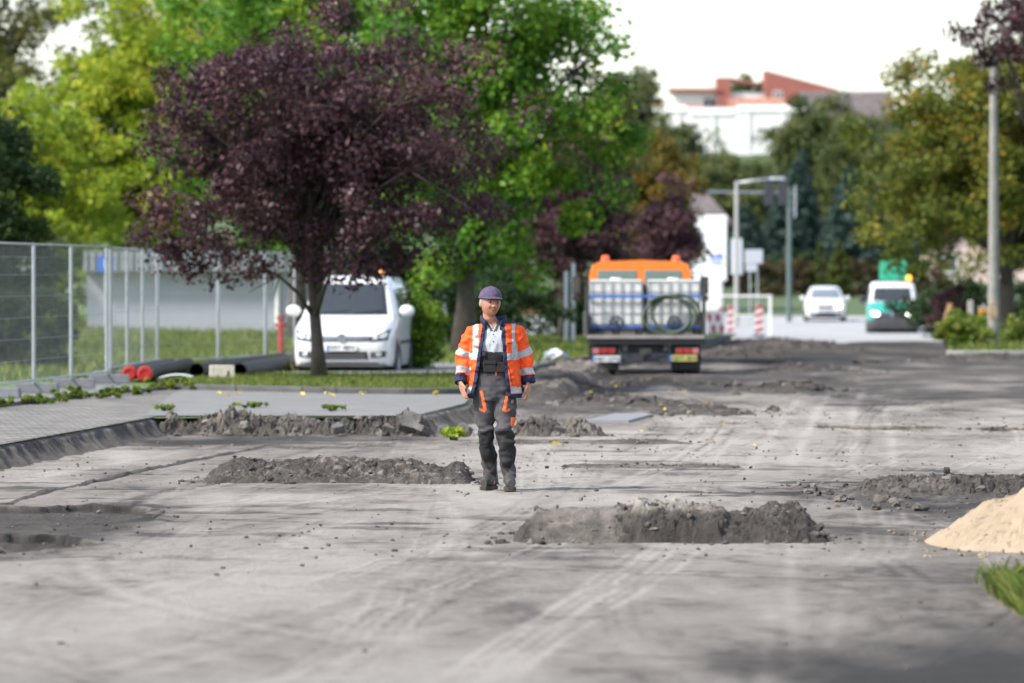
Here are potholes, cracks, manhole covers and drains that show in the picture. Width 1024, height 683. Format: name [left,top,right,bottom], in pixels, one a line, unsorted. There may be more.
pothole [0,532,134,555]
pothole [0,503,180,532]
